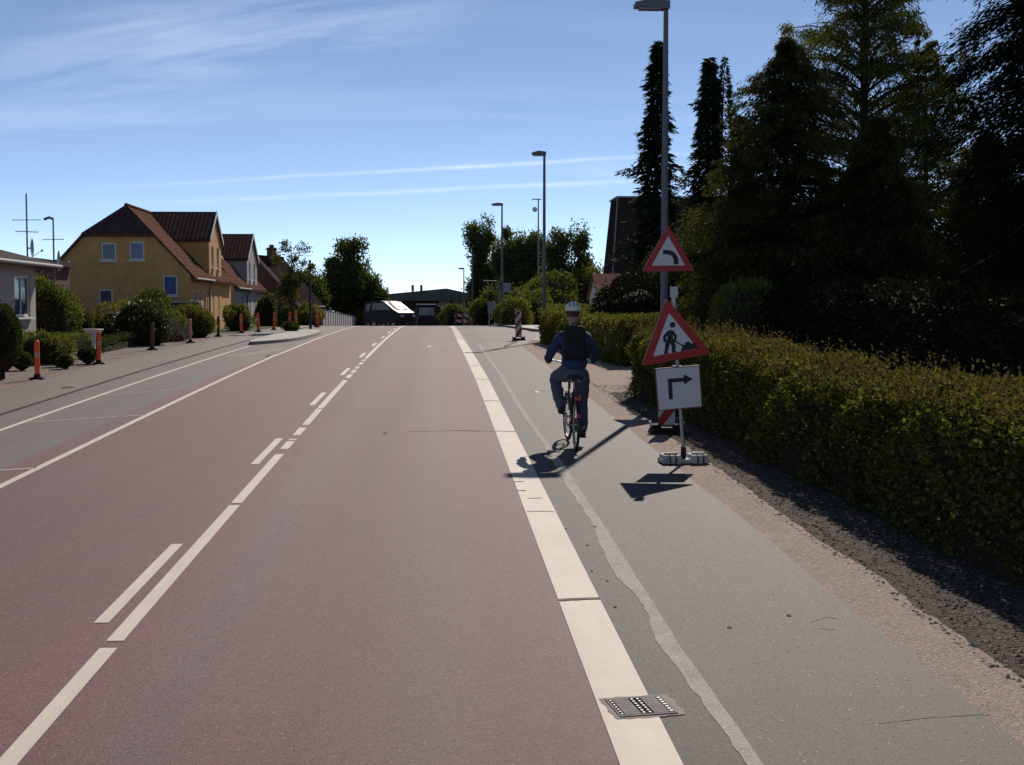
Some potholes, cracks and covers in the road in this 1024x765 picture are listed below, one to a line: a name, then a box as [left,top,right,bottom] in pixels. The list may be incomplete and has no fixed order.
drain grate [599,694,685,719]
crack [878,713,989,724]
